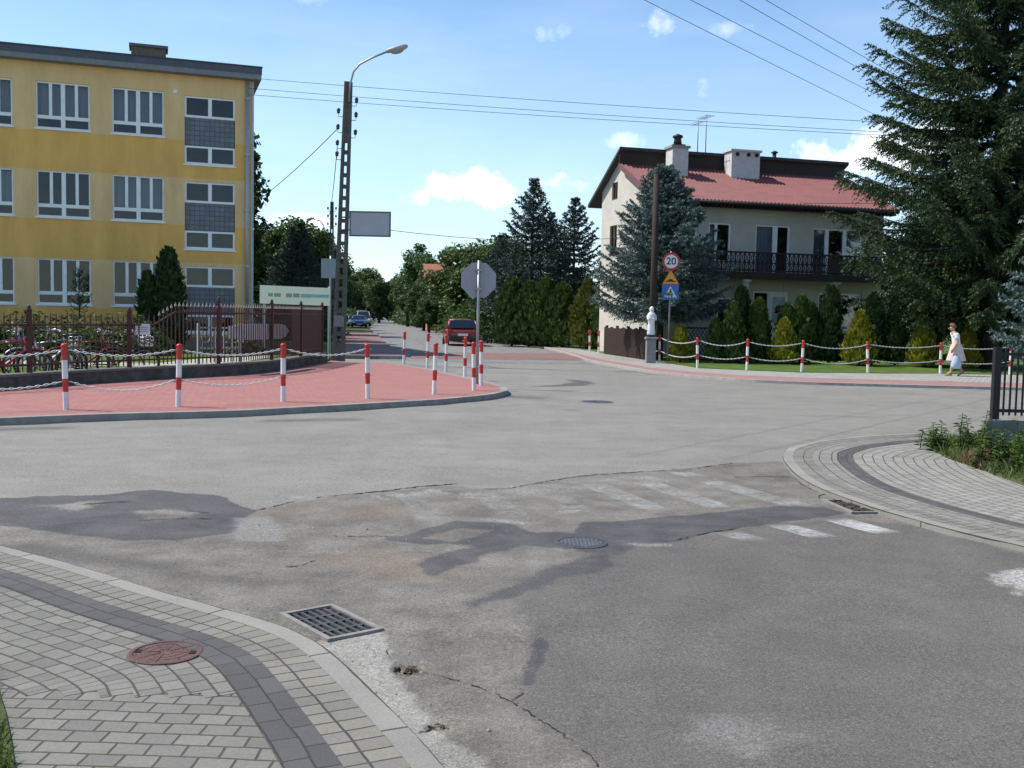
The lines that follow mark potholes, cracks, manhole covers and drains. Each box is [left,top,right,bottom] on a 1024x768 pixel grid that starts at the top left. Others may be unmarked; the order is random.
drain grate [822,499,878,515]
manhole cover [127,640,204,666]
pothole [392,664,429,677]
crack [432,673,598,766]
manhole cover [555,536,608,549]
drain grate [279,603,384,642]
